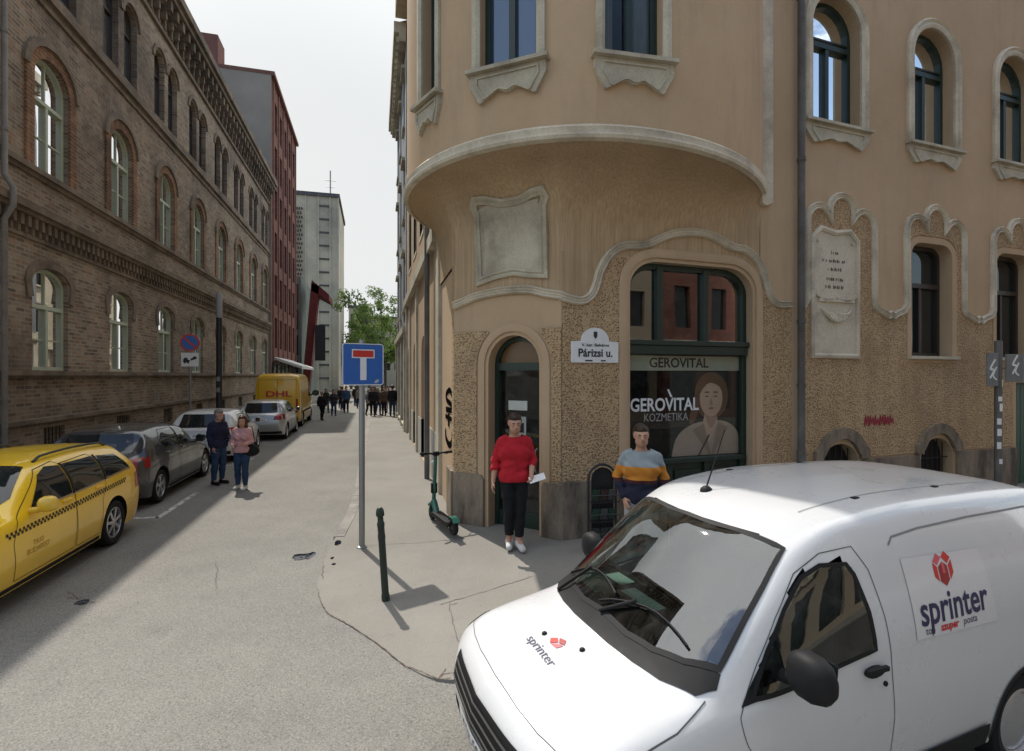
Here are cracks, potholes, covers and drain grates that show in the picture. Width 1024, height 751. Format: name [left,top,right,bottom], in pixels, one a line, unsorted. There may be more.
pothole [292,552,316,560]
crack [446,576,531,642]
